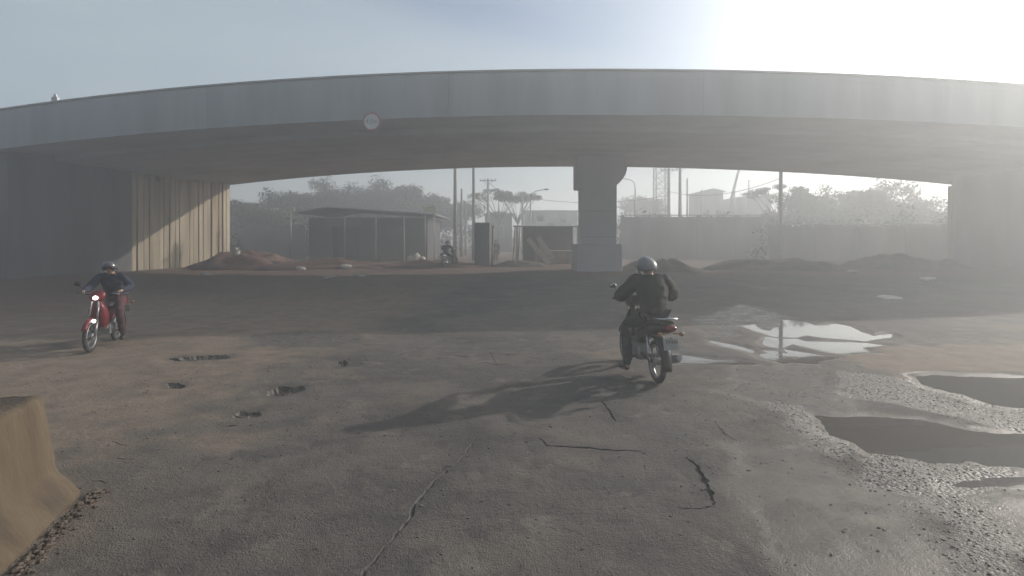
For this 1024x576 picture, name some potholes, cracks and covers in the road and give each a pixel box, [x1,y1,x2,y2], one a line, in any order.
pothole [267,386,305,396]
crack [678,457,715,509]
crack [539,438,642,452]
crack [361,428,478,576]
